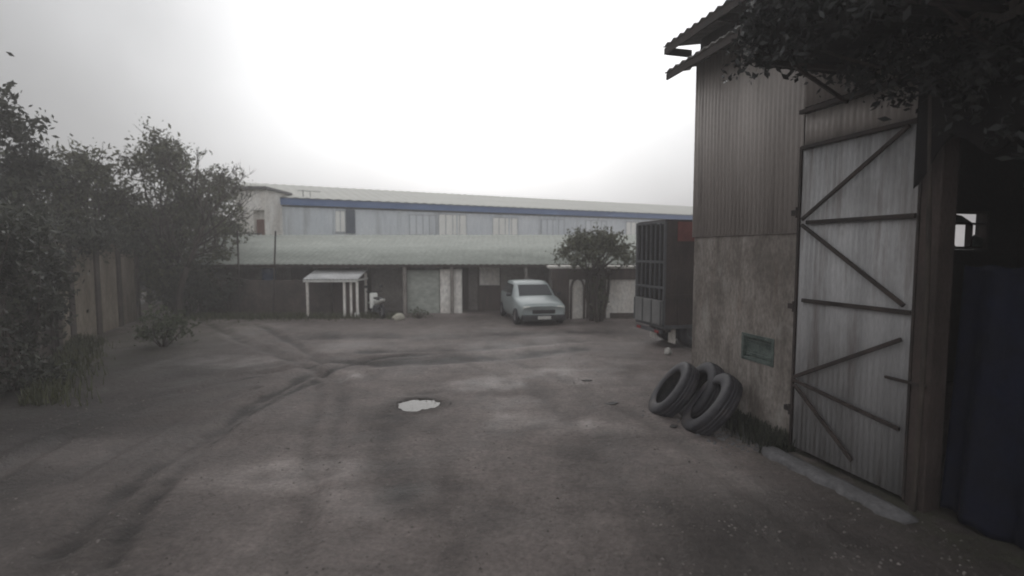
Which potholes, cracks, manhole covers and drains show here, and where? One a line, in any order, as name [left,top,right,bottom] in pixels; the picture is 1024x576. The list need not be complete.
pothole [385,396,452,414]
